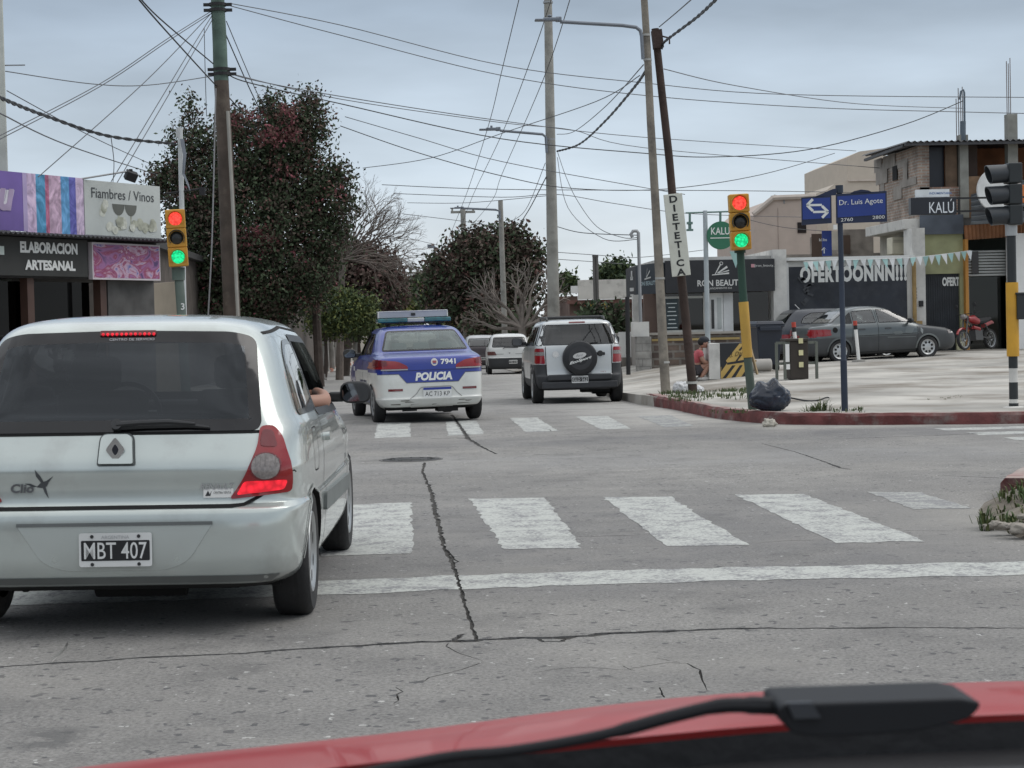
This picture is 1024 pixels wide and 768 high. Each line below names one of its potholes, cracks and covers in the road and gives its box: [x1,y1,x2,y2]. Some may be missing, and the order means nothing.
crack [765,444,845,469]
crack [438,415,496,454]
crack [425,644,482,681]
crack [541,658,707,690]
crack [51,642,68,663]
